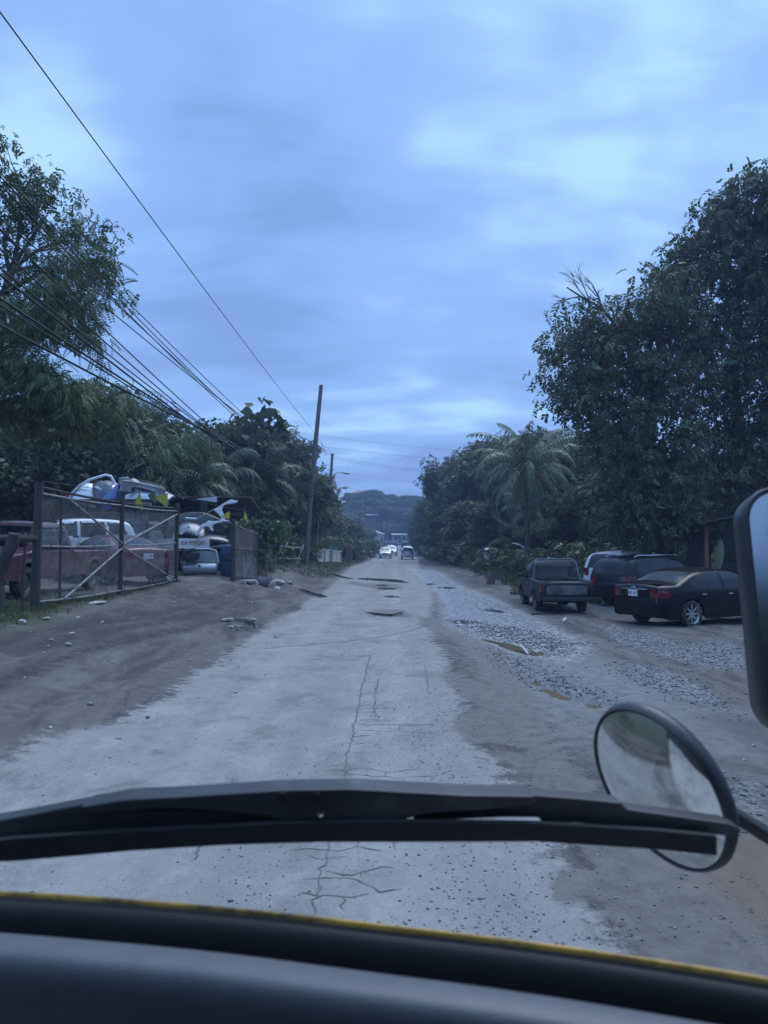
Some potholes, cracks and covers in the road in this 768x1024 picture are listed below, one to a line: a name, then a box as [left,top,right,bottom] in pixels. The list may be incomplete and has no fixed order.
crack [264,623,435,915]
